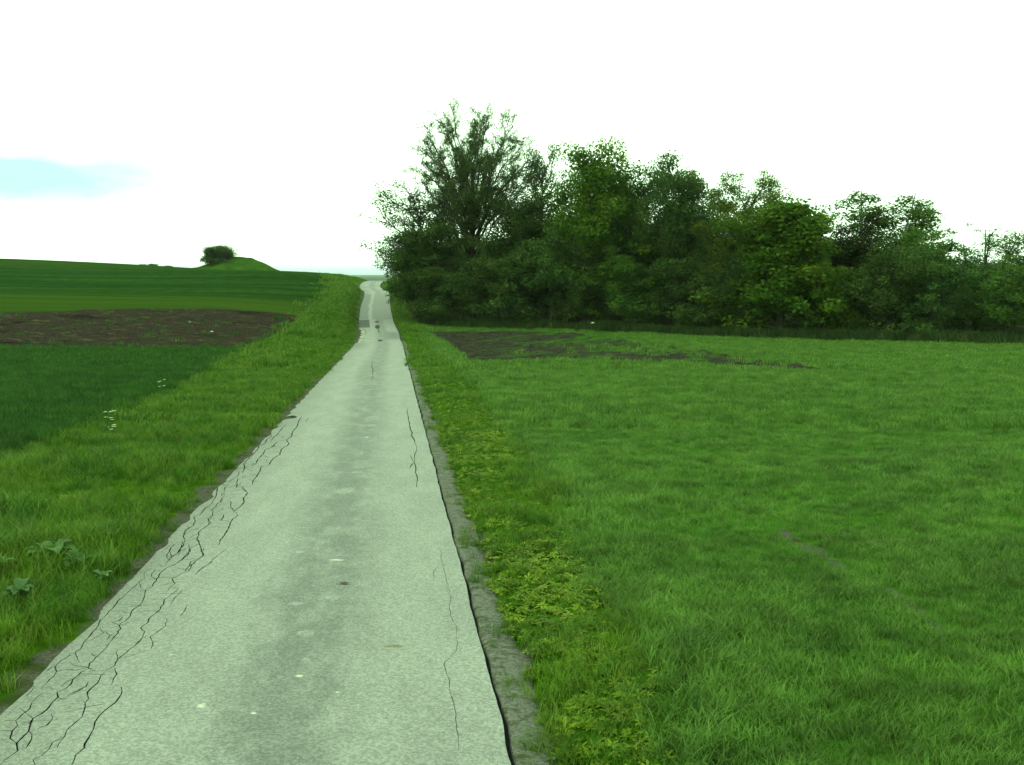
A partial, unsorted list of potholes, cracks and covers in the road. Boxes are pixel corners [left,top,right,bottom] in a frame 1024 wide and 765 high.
crack [2,418,308,765]
crack [402,342,516,765]
